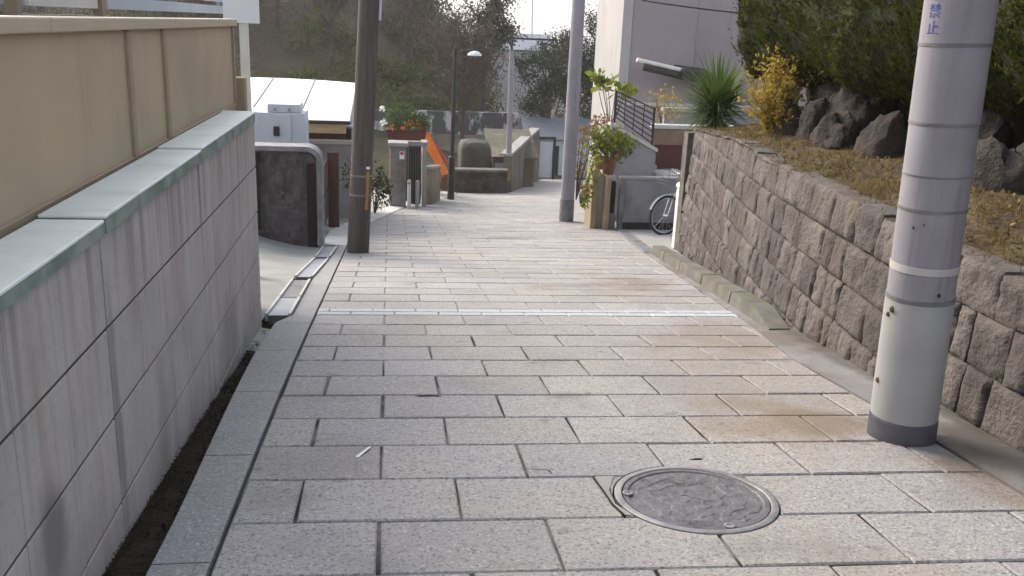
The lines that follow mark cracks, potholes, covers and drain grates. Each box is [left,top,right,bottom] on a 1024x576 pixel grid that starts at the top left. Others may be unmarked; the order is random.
manhole cover [613,466,780,537]
